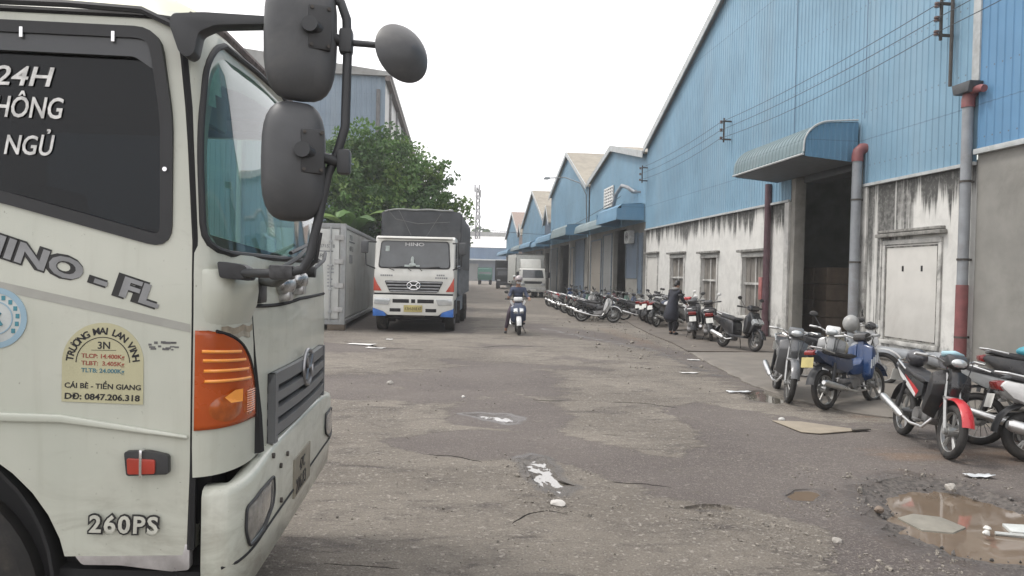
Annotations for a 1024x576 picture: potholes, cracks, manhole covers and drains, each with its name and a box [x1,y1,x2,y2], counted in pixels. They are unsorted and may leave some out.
pothole [860,477,1024,571]
crack [512,510,565,524]
pothole [680,504,736,512]
pothole [517,454,577,495]
pothole [785,489,824,500]
pothole [465,413,522,424]
